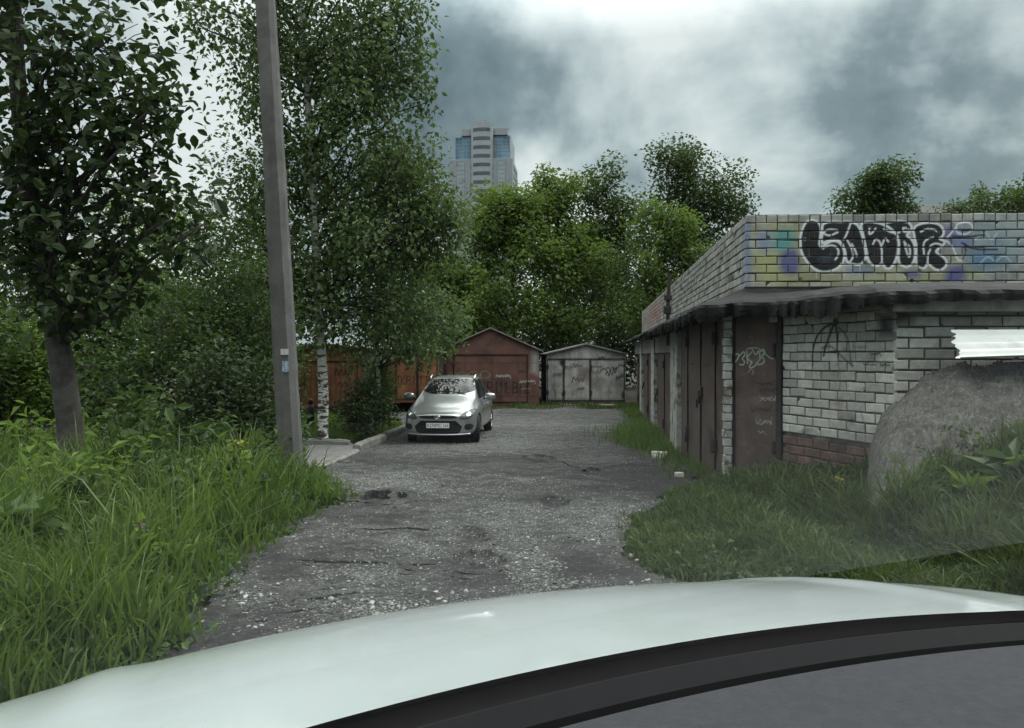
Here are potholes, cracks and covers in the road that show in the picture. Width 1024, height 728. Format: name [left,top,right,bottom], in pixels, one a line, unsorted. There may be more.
pothole [517,453,561,465]
crack [555,460,635,469]
crack [245,525,507,621]
pothole [387,490,415,500]
pothole [437,546,517,572]
pothole [354,488,397,502]
pothole [532,494,579,509]
